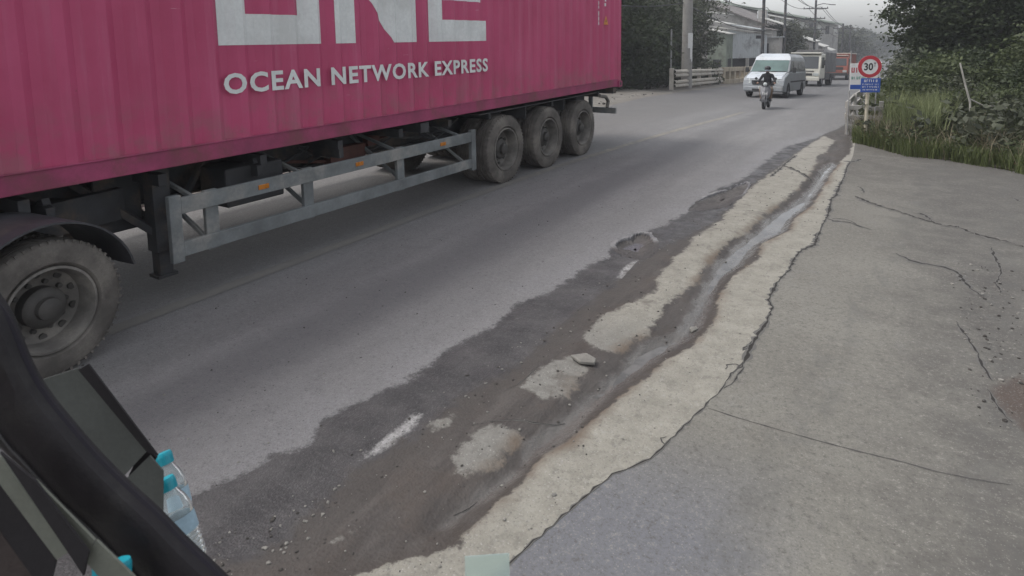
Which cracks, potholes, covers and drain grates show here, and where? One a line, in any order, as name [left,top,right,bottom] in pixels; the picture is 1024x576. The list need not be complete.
pothole [610,231,659,260]
crack [474,155,1024,566]
